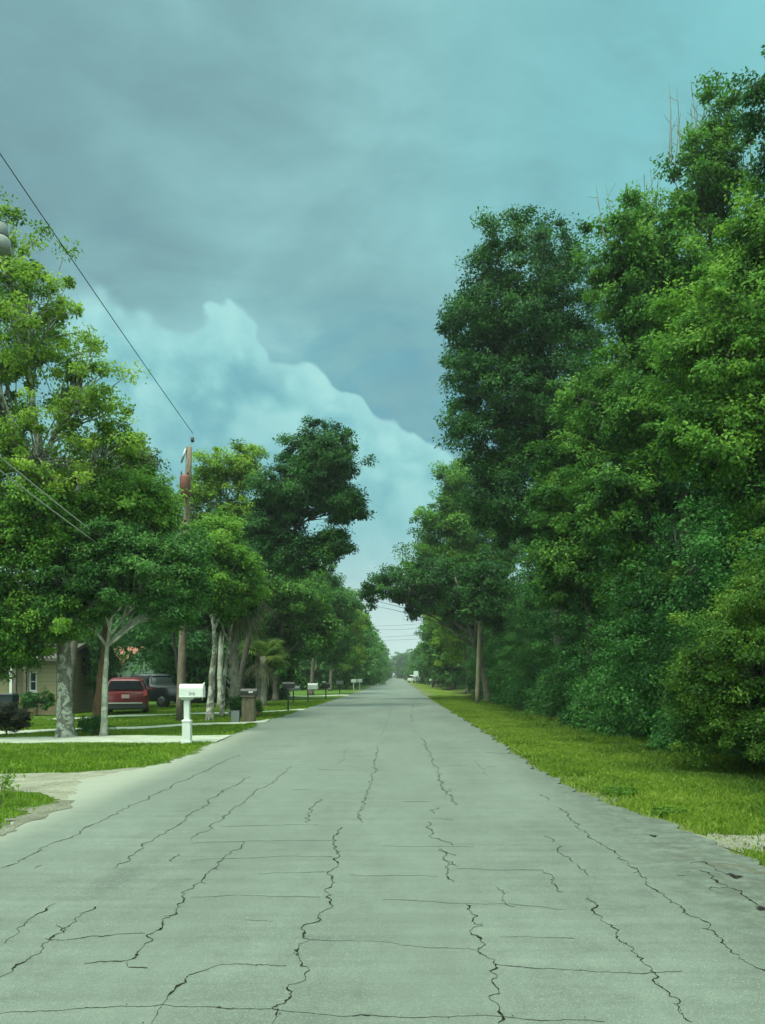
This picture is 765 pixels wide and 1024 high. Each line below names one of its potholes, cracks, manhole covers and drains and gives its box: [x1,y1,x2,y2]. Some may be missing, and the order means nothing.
crack [560,809,764,970]
crack [0,767,691,1023]
crack [397,738,524,881]
